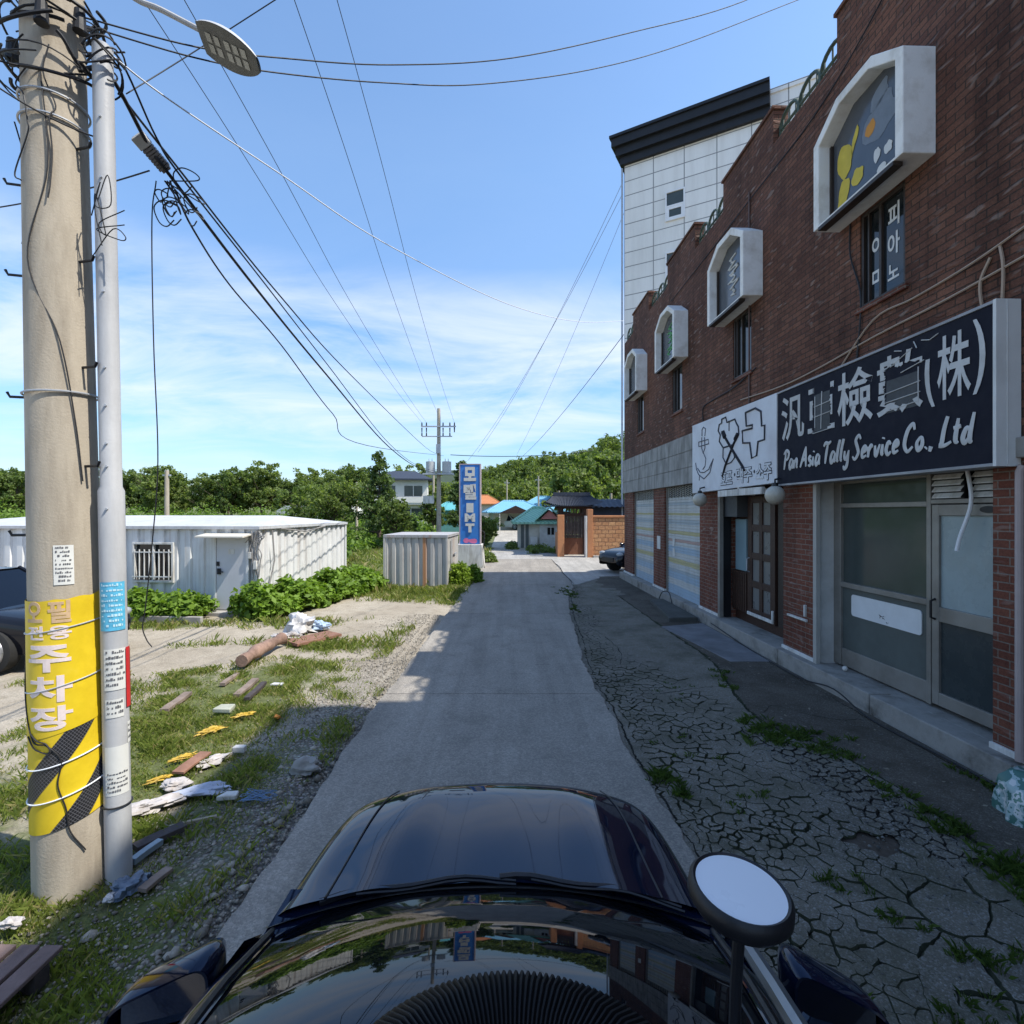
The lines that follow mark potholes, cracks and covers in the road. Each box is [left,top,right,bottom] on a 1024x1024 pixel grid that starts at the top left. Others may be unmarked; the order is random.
crack [552,560,1024,1024]
